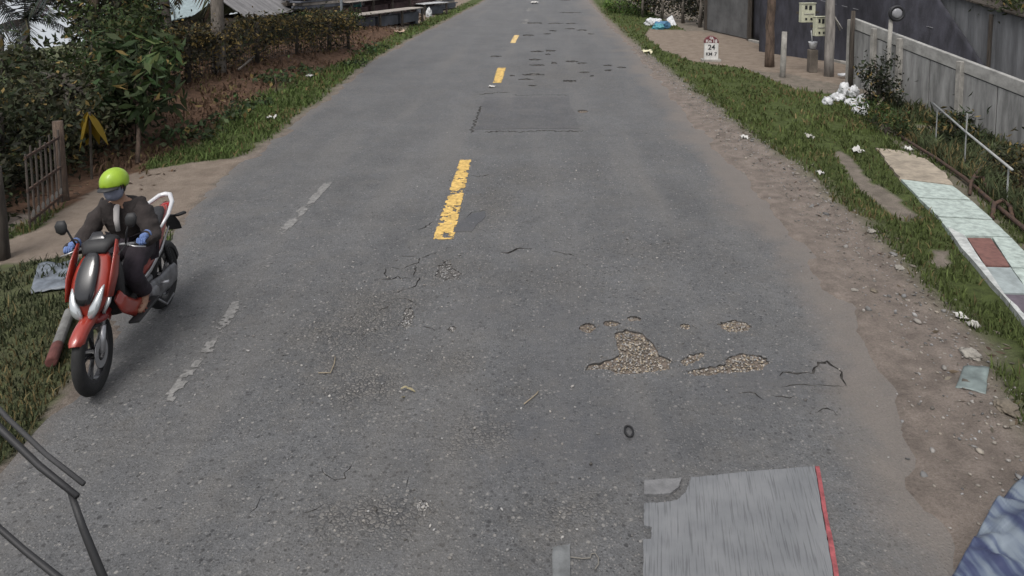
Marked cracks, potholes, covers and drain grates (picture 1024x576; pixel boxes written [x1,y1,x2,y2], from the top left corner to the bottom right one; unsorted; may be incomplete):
pothole [431,259,462,281]
crack [739,360,846,401]
pothole [709,318,759,336]
pothole [579,319,600,336]
pothole [570,326,679,378]
pothole [681,349,782,378]
crack [379,252,437,311]
